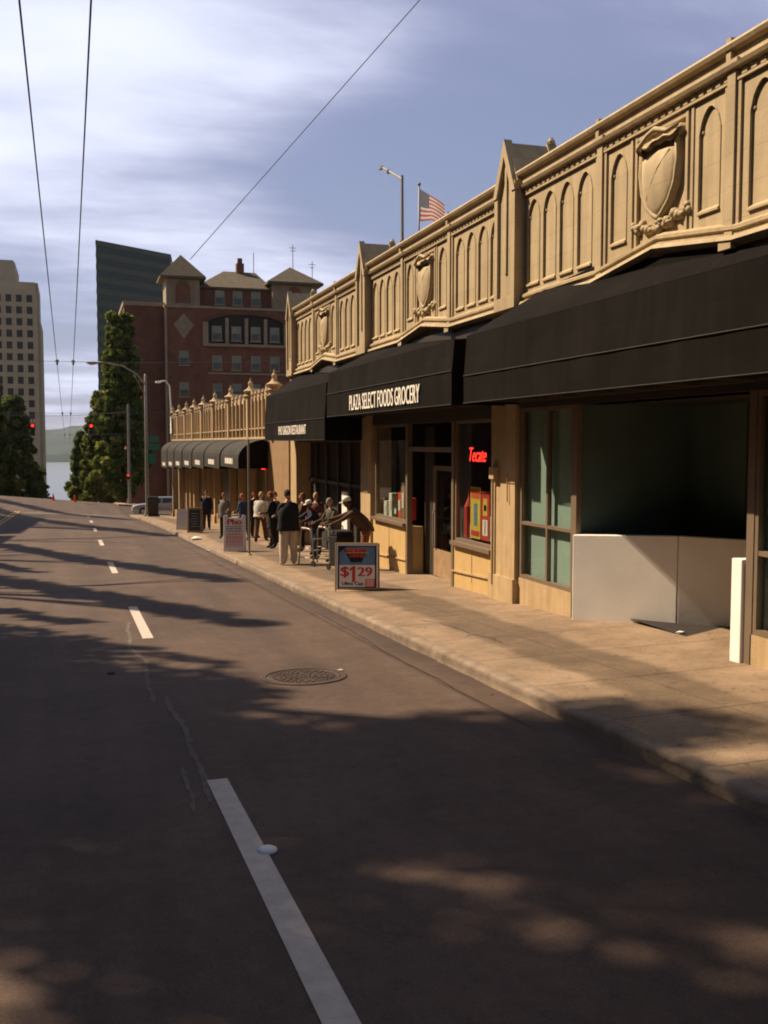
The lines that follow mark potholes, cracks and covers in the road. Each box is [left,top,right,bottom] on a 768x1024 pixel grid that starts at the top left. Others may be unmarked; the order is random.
manhole cover [260,668,347,686]
crack [125,622,213,814]
